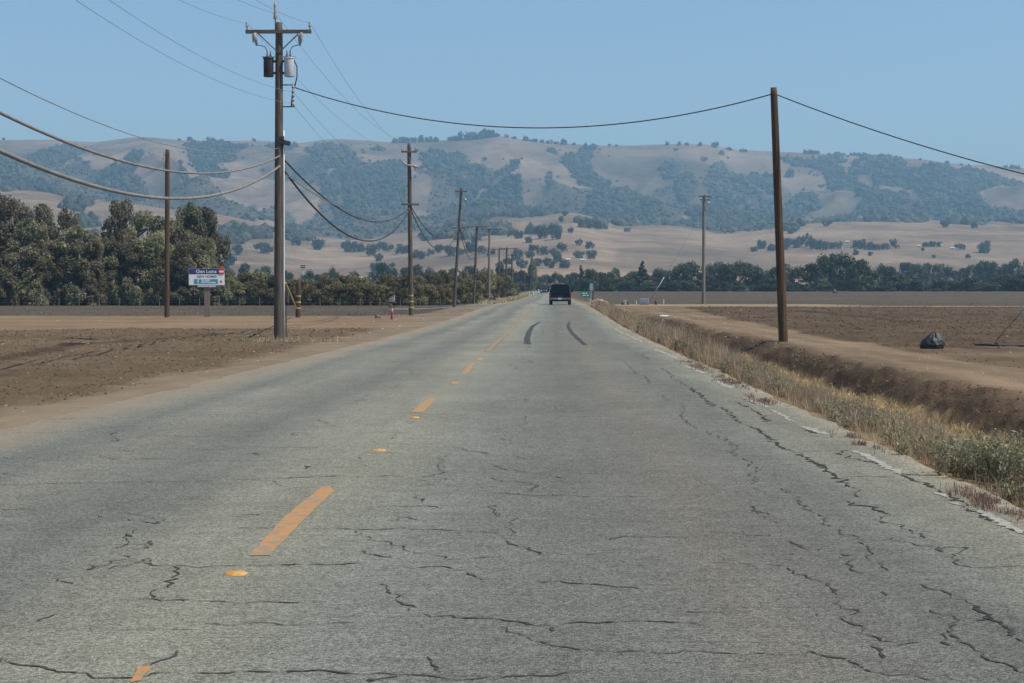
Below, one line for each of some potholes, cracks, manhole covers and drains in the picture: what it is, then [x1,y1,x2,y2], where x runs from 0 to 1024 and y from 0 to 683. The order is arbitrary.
crack [600,340,1024,567]
crack [0,649,572,681]
crack [628,365,931,680]
crack [881,583,1024,673]
crack [37,397,644,621]
crack [382,584,772,654]
